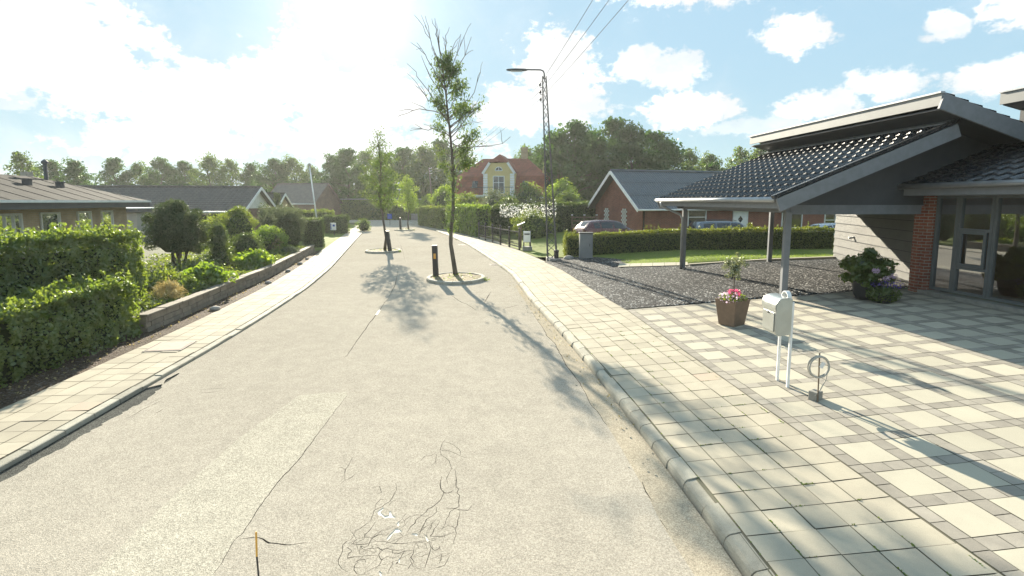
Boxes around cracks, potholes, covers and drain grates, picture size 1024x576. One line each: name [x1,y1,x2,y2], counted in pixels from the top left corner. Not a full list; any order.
crack [244,537,301,545]
crack [338,440,471,575]
